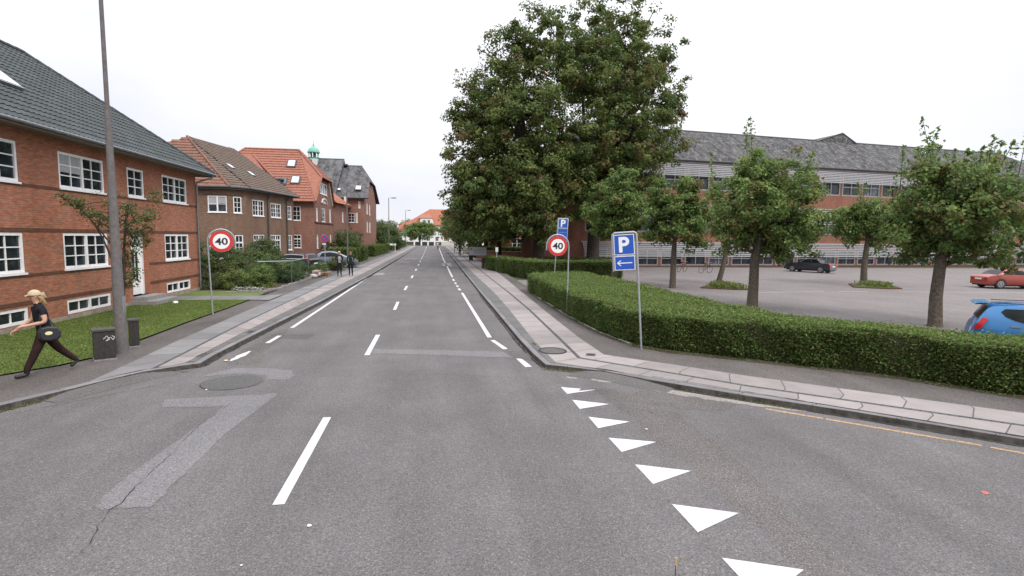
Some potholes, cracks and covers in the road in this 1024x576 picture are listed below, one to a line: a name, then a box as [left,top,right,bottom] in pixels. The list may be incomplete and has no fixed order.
crack [81,404,229,551]
